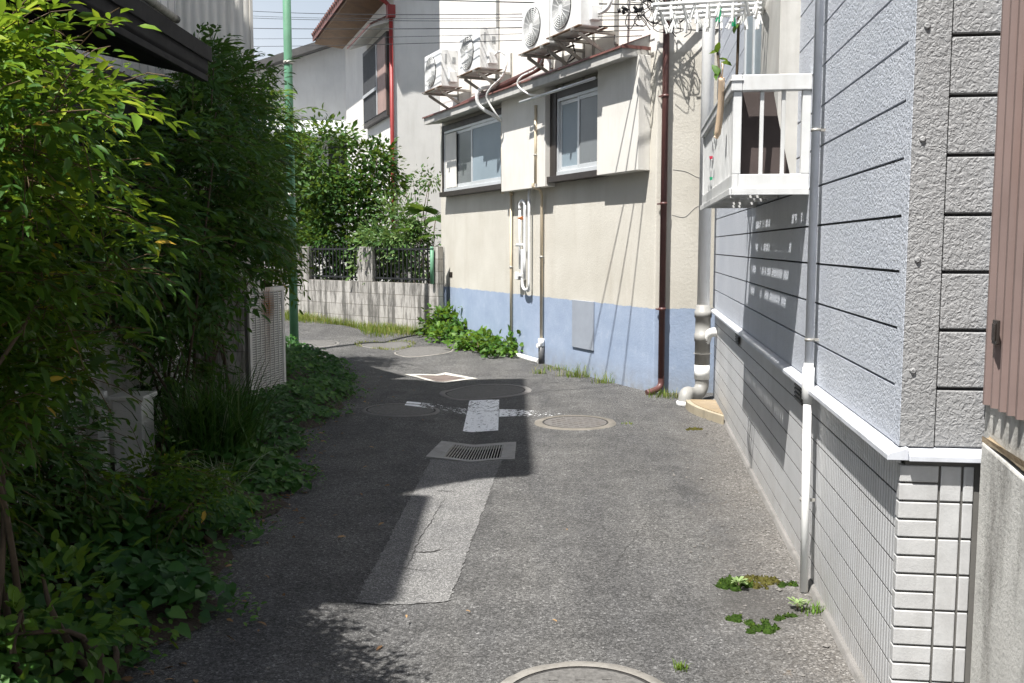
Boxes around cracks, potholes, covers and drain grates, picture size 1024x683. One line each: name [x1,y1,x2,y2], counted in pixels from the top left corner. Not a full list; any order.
crack [372,490,445,570]
drain grate [426,441,516,463]
manhole cover [439,384,532,401]
manhole cover [501,661,664,683]
manhole cover [361,403,440,417]
manhole cover [534,415,616,430]
manhole cover [394,346,453,357]
